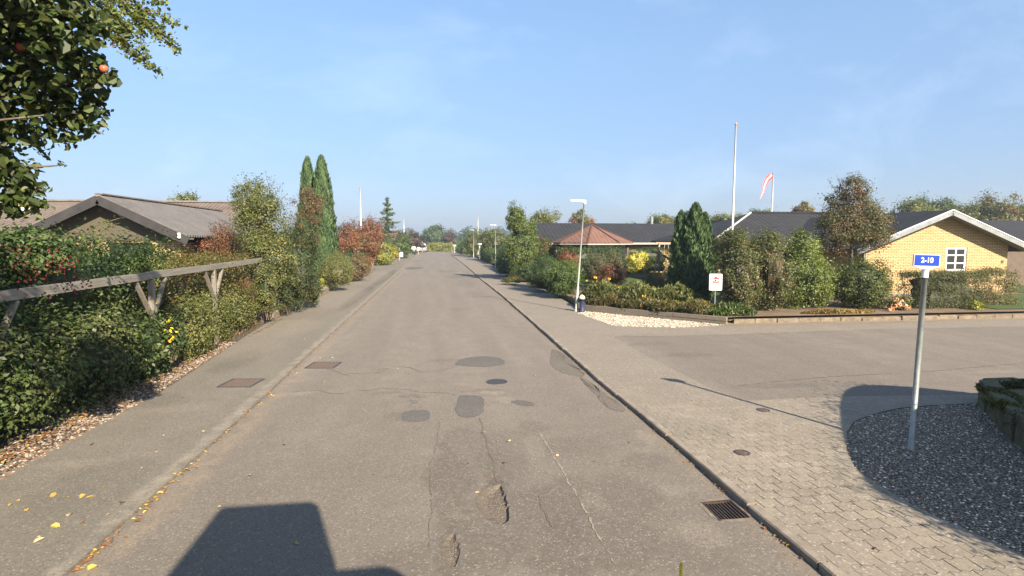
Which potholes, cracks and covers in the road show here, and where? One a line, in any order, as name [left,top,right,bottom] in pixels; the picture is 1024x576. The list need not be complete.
crack [296,366,455,395]
pothole [475,484,509,525]
manhole cover [217,379,264,387]
crack [479,417,497,481]
crack [428,418,441,549]
pothole [438,533,460,569]
crack [538,433,615,563]
drain grate [699,498,751,522]
